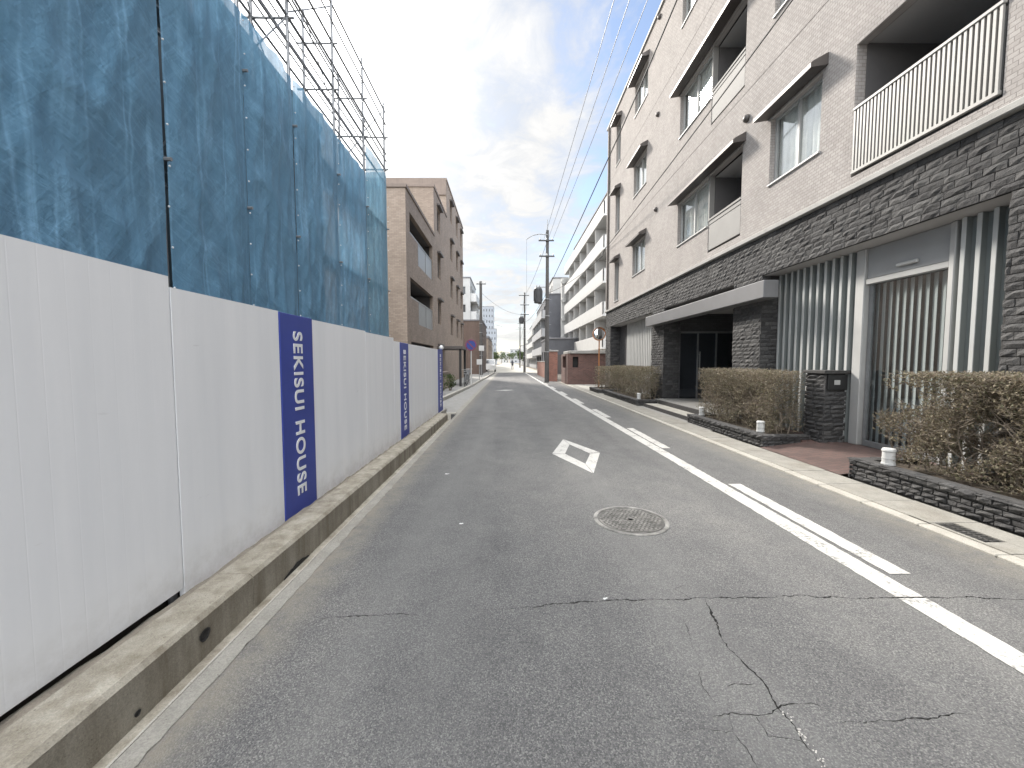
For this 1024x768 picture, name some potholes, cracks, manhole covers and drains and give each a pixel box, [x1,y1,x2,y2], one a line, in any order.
crack [472,587,1024,766]
manhole cover [594,506,670,536]
drain grate [938,523,1003,542]
